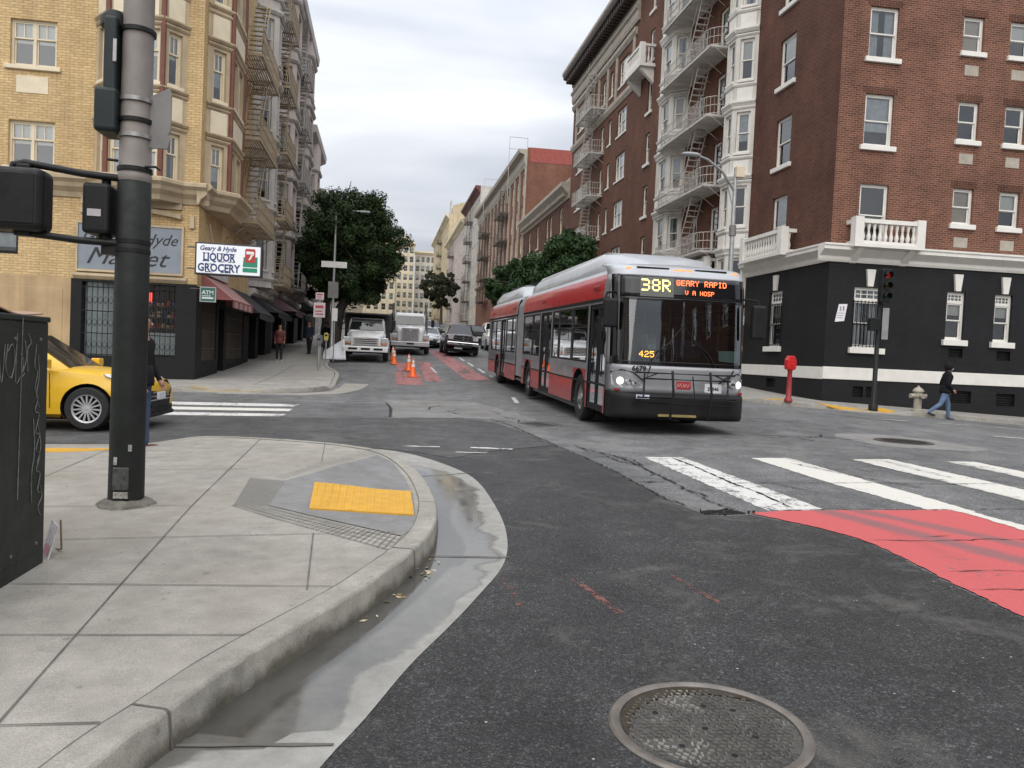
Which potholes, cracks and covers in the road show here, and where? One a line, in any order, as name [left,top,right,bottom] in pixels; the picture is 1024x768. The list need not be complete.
pothole [700,508,755,516]
manhole cover [608,682,816,768]
